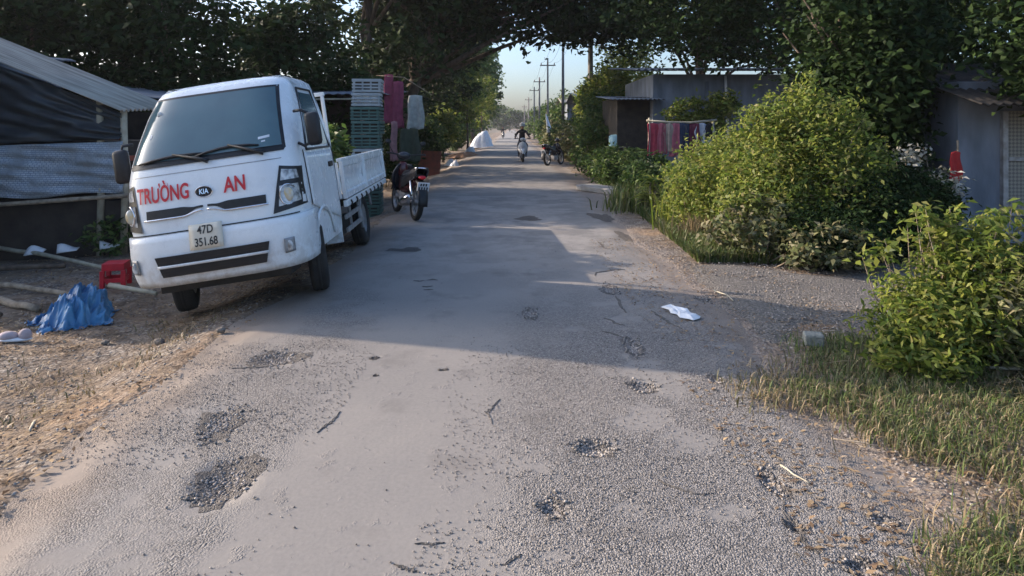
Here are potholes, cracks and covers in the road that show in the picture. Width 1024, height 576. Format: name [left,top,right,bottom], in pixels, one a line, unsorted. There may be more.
pothole [586,213,614,222]
pothole [246,351,314,367]
pothole [197,409,246,446]
pothole [537,497,565,521]
pothole [568,439,617,458]
pothole [757,463,796,500]
crack [602,296,627,337]
pothole [186,452,268,513]
pothole [620,337,646,356]
